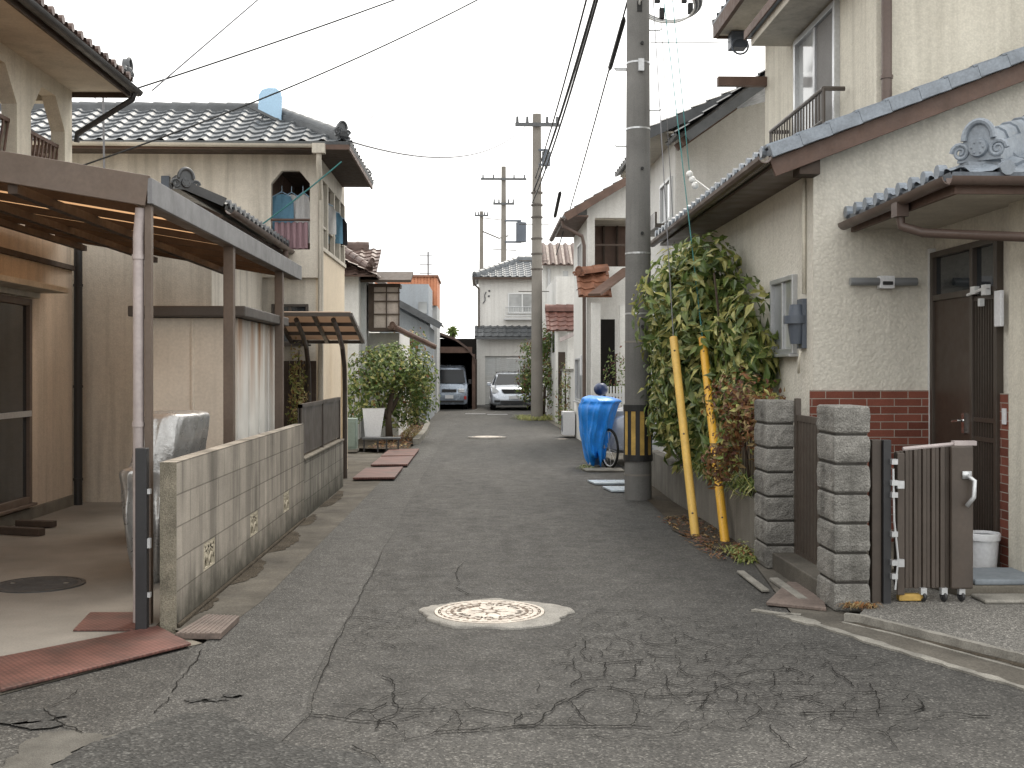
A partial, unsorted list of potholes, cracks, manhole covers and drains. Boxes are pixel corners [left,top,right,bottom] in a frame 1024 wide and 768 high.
crack [314,609,990,767]
crack [154,649,202,712]
crack [43,689,83,733]
manhole cover [419,598,575,630]
manhole cover [0,576,86,593]
